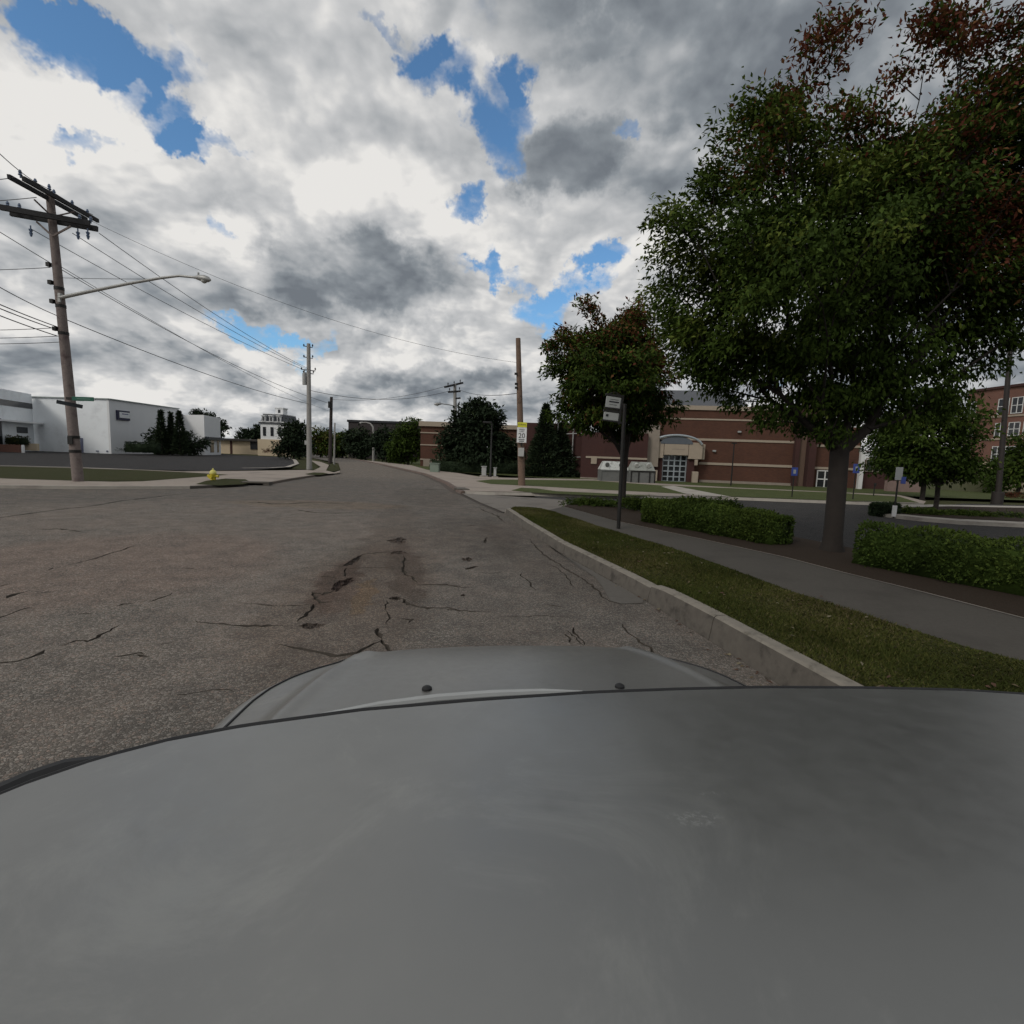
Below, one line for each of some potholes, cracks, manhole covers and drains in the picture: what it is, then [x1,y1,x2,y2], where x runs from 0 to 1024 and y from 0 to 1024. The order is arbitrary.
crack [196,552,501,657]
crack [0,546,172,663]
crack [622,624,654,653]
crack [506,537,638,645]
pothole [331,577,354,592]
